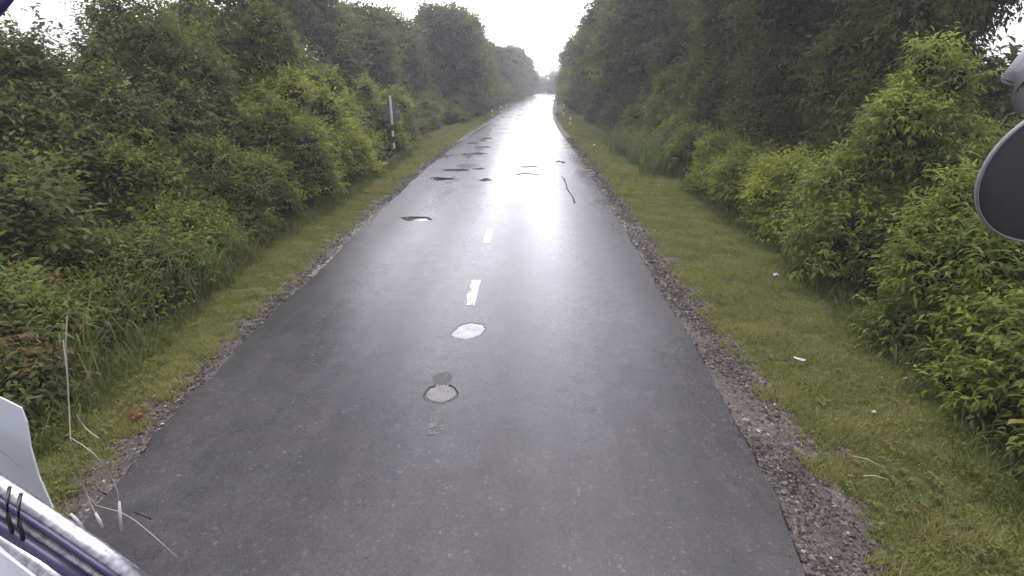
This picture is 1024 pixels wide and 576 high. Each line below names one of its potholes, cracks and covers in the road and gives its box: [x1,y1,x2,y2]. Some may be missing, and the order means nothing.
pothole [450,322,486,340]
pothole [422,372,459,405]
